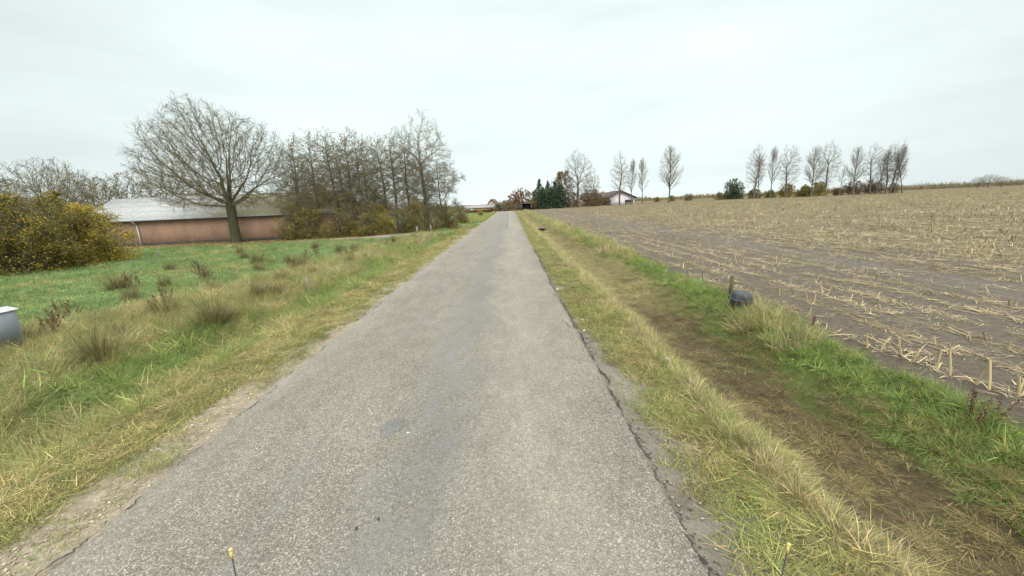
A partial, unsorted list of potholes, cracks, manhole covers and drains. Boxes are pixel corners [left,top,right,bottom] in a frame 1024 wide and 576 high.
crack [534,249,711,576]
crack [35,520,108,576]
